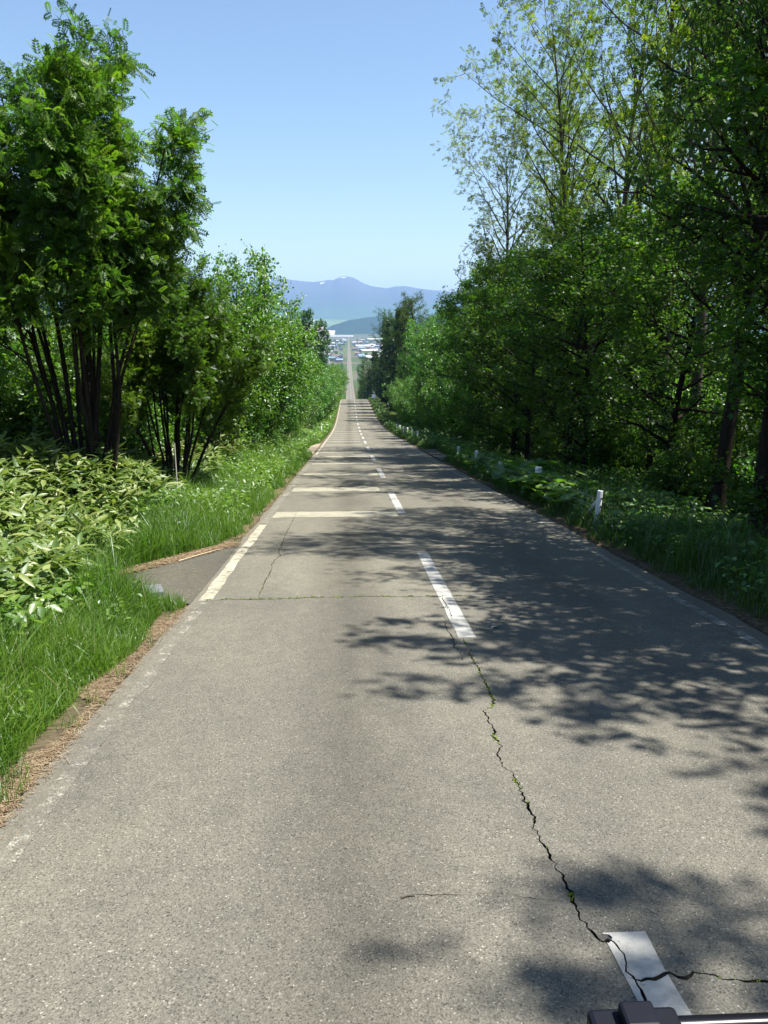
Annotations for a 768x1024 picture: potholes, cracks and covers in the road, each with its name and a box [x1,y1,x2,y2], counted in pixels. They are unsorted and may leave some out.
crack [204,518,768,1001]
